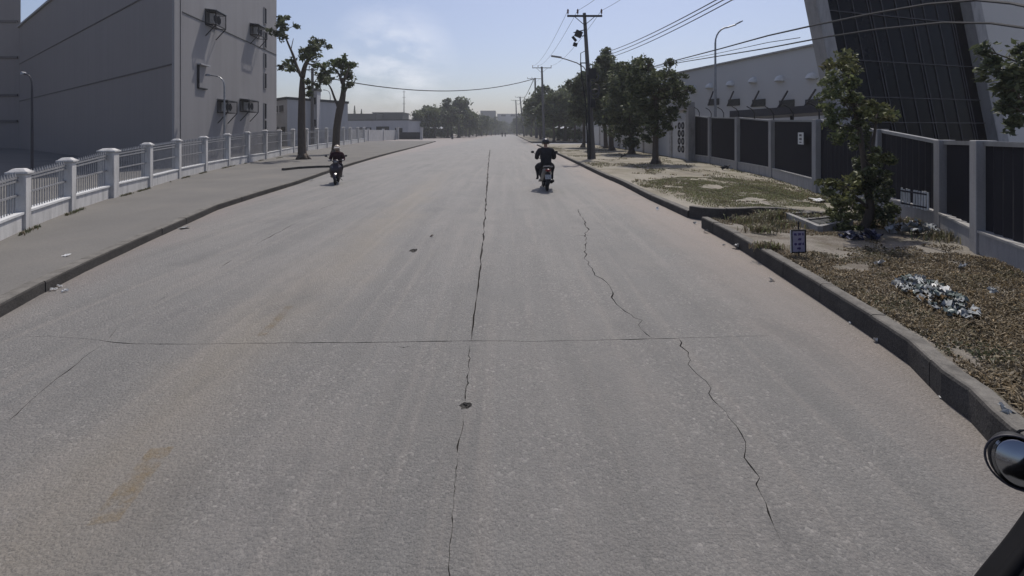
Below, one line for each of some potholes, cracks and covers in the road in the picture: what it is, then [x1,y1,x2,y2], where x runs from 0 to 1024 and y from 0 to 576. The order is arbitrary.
crack [7,207,777,532]
crack [448,151,490,576]
